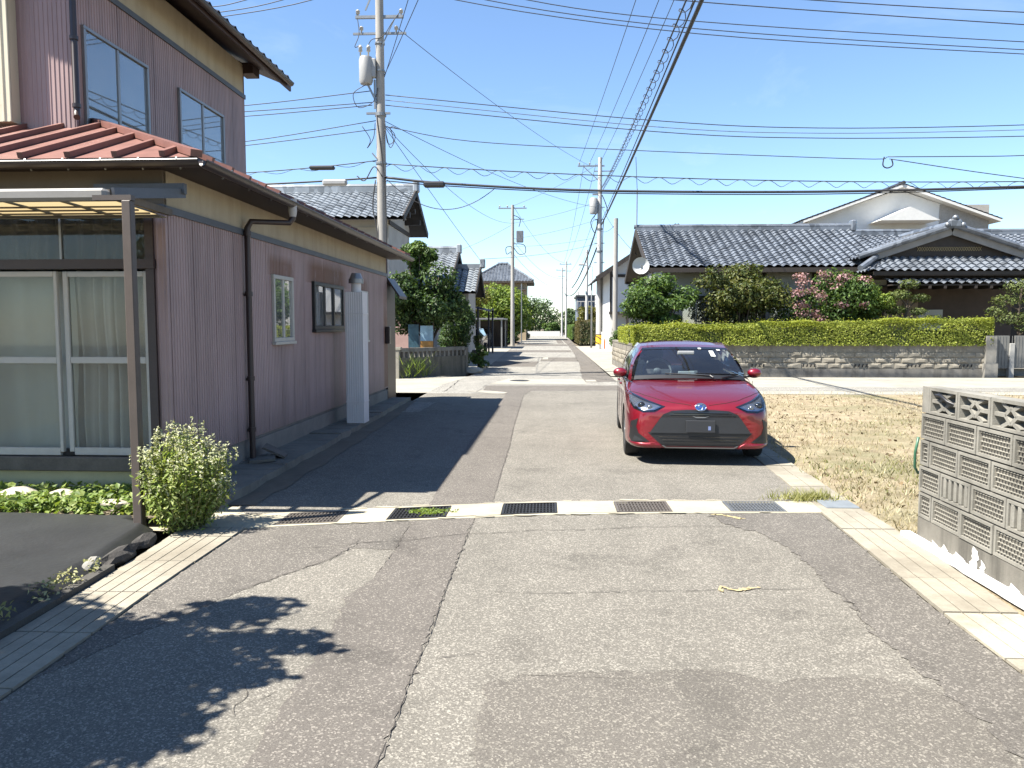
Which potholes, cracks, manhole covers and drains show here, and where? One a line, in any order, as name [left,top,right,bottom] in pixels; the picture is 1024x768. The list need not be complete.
drain grate [614,501,673,512]
crack [227,525,741,595]
drain grate [274,510,349,525]
drain grate [722,501,787,512]
drain grate [386,505,451,520]
drain grate [501,502,557,515]
